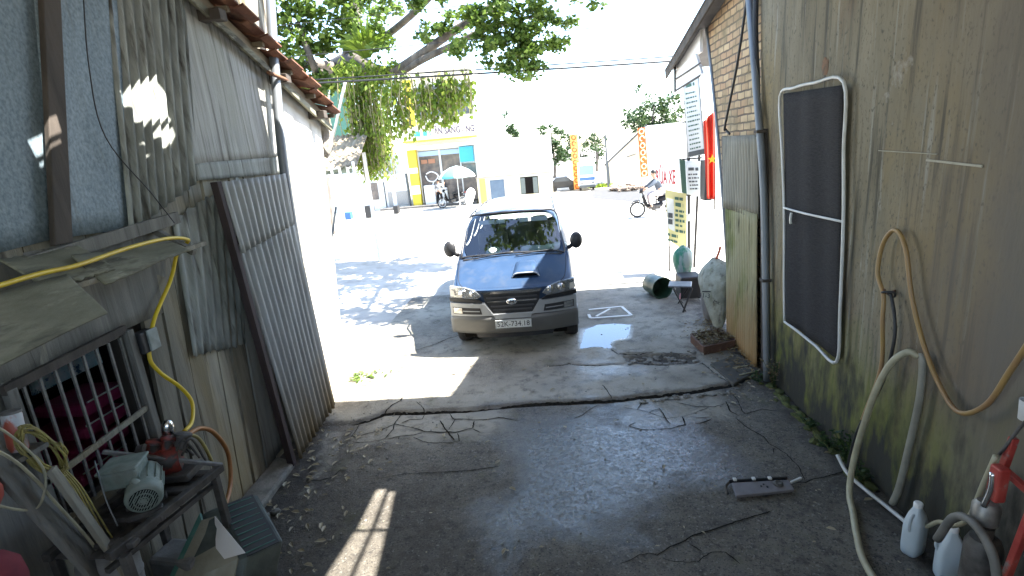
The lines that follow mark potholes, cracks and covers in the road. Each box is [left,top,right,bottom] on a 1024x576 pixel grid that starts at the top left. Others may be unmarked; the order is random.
crack [351,397,517,443]
crack [625,363,843,483]
crack [620,511,770,564]
crack [379,466,497,479]
